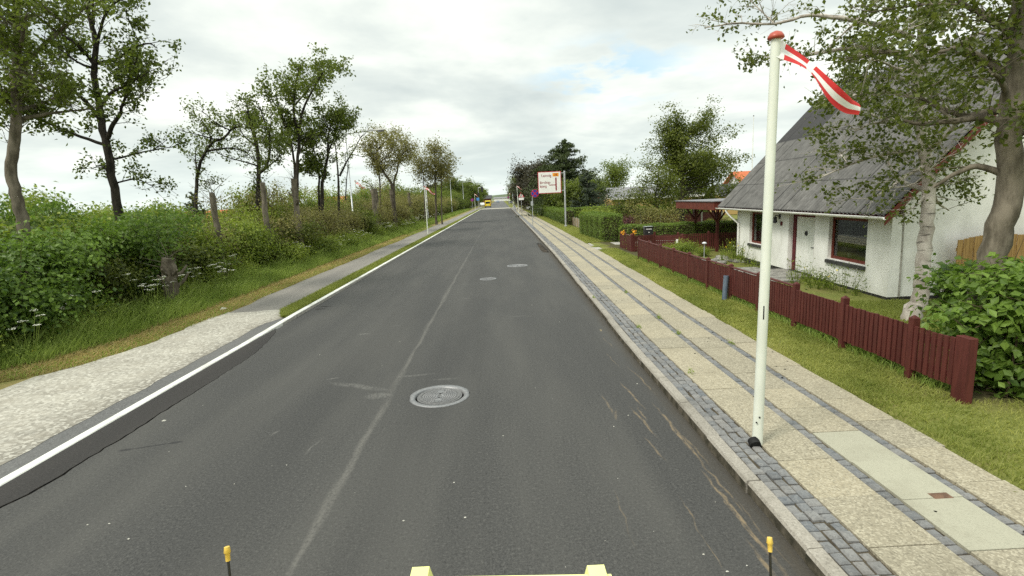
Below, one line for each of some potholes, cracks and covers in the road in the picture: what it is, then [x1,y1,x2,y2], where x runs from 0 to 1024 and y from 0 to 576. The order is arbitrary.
manhole cover [409,385,470,408]
